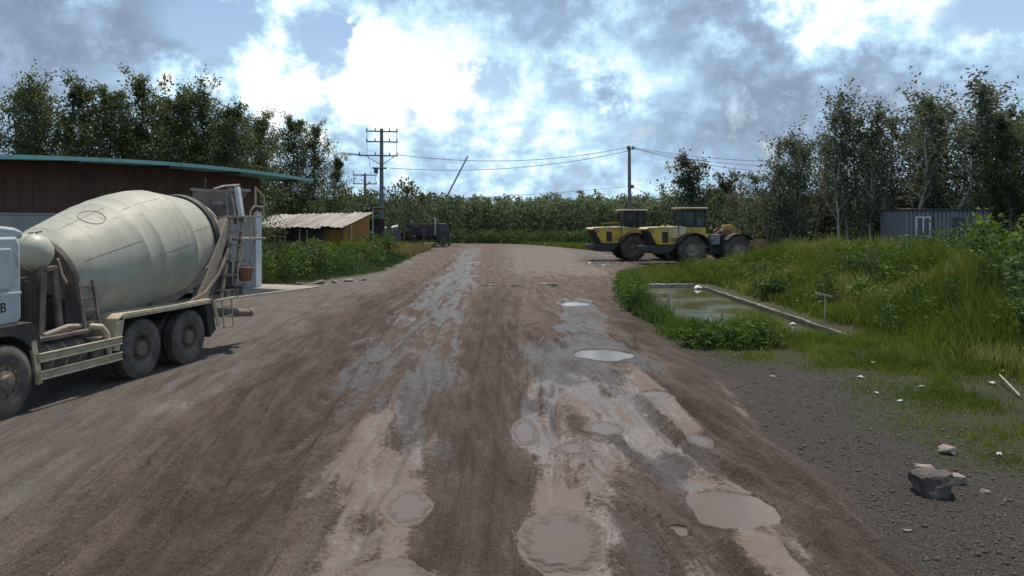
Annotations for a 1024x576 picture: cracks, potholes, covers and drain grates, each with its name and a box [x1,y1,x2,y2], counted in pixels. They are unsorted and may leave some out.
pothole [378,485,439,528]
pothole [578,420,629,437]
pothole [683,431,716,450]
pothole [554,440,588,457]
pothole [665,523,691,537]
pothole [638,388,673,399]
pothole [677,487,792,532]
pothole [509,414,540,451]
pothole [509,502,614,576]
pothole [568,347,640,363]
